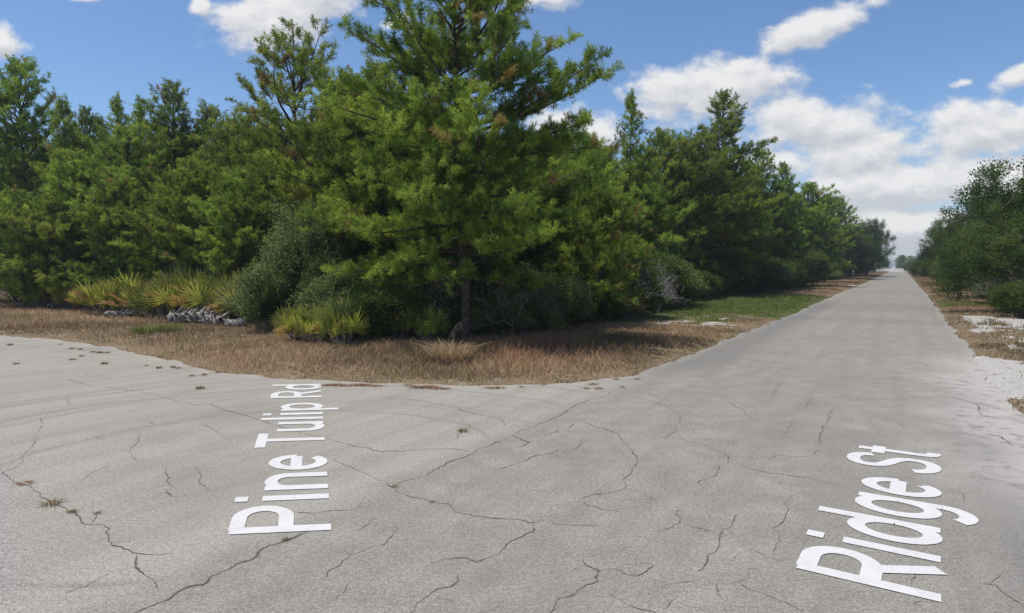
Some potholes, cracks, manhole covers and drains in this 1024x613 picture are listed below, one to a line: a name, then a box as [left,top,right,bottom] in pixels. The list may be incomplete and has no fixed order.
crack [3,419,169,592]
crack [499,396,842,613]
crack [334,459,610,613]
crack [299,506,398,605]
